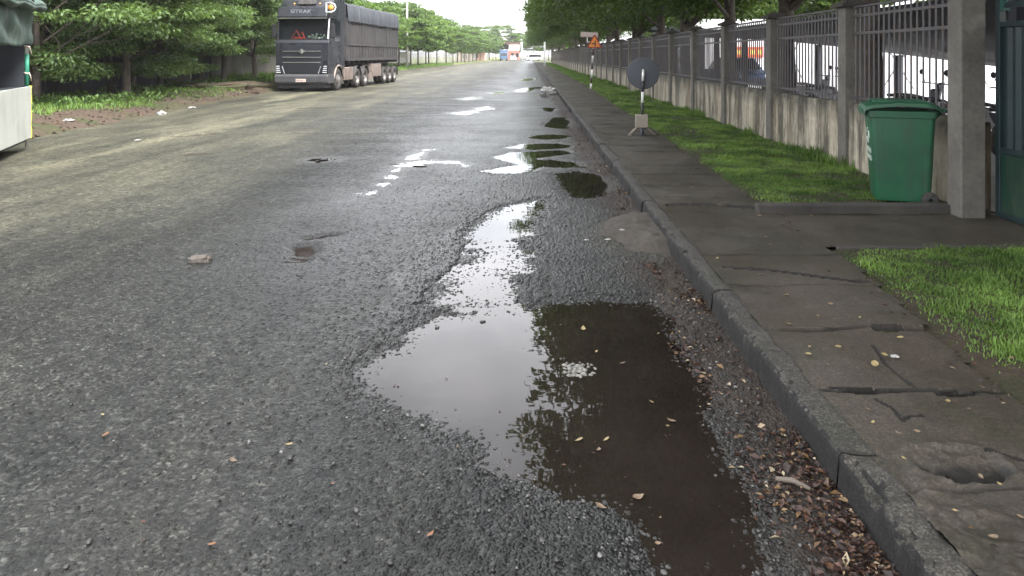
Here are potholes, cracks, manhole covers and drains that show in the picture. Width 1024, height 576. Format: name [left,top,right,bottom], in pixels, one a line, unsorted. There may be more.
pothole [347,298,769,576]
pothole [461,197,549,247]
pothole [480,159,587,174]
pothole [551,170,613,200]
pothole [905,442,1019,485]
crack [870,345,925,422]
crack [721,266,871,283]
pothole [504,142,575,150]
pothole [490,149,573,164]
pothole [422,242,536,311]
pothole [292,245,319,258]
pothole [543,116,571,129]
